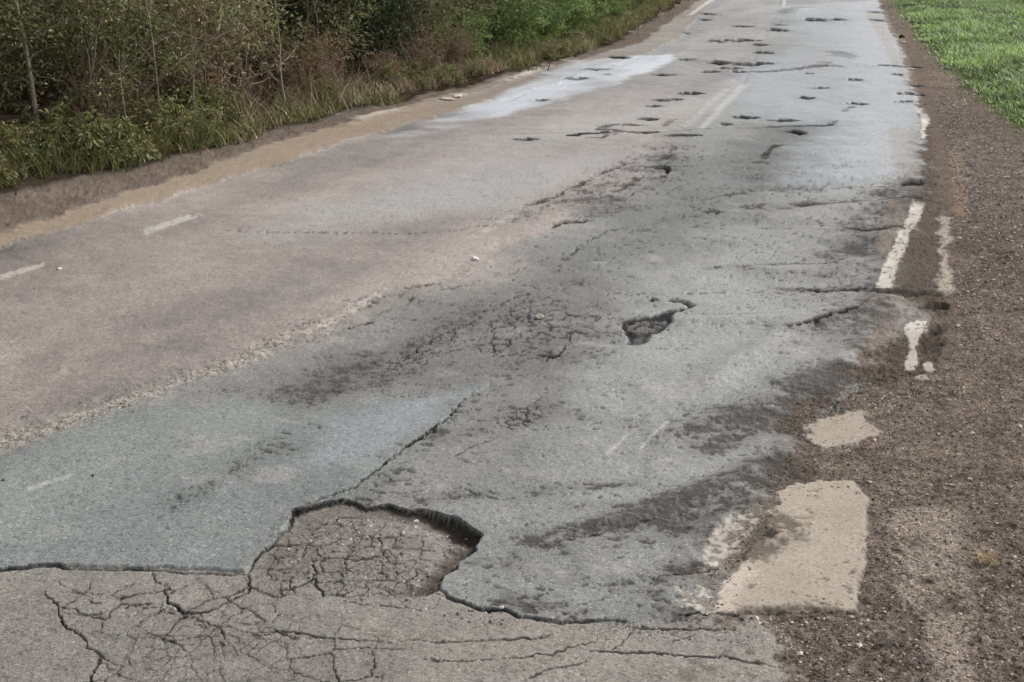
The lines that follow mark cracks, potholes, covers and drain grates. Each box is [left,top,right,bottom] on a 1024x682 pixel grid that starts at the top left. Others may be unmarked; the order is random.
crack [332,292,601,393]
pothole [252,498,484,603]
crack [677,286,868,327]
crack [0,398,853,682]
pothole [618,297,697,345]
pothole [781,128,809,136]
